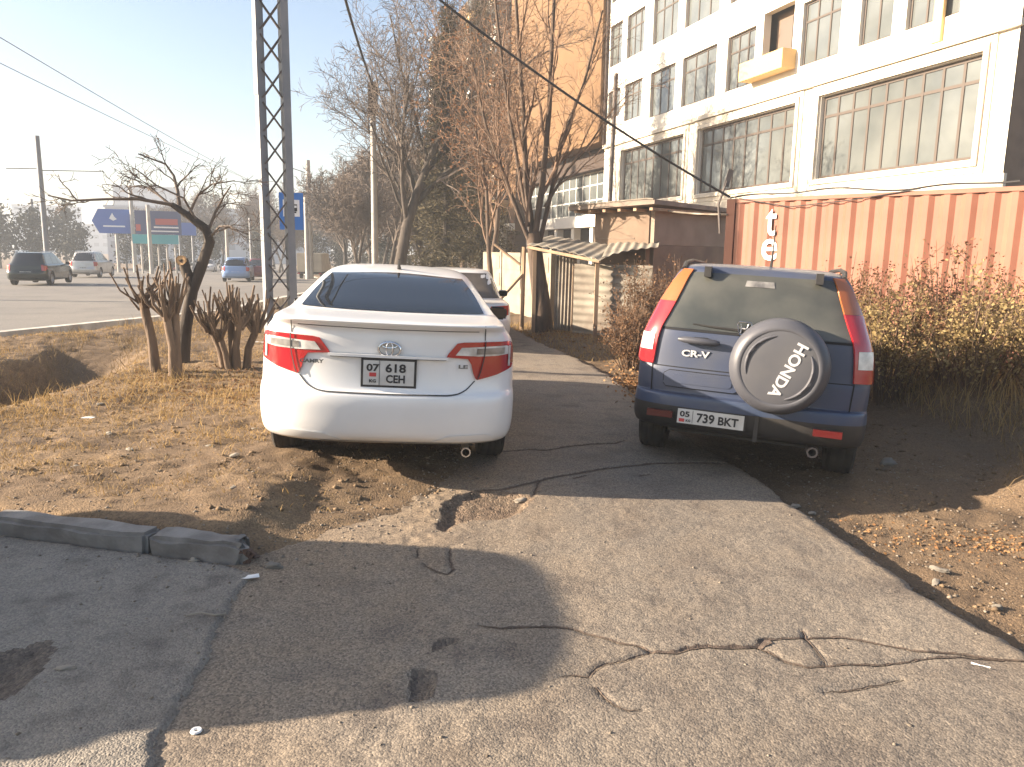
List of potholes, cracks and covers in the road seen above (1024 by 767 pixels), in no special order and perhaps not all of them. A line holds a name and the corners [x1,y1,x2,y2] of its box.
pothole [435,491,535,532]
pothole [407,668,439,702]
crack [478,625,1024,711]
crack [416,548,455,575]
pothole [427,637,459,654]
crack [474,440,725,497]
pothole [0,640,59,700]
